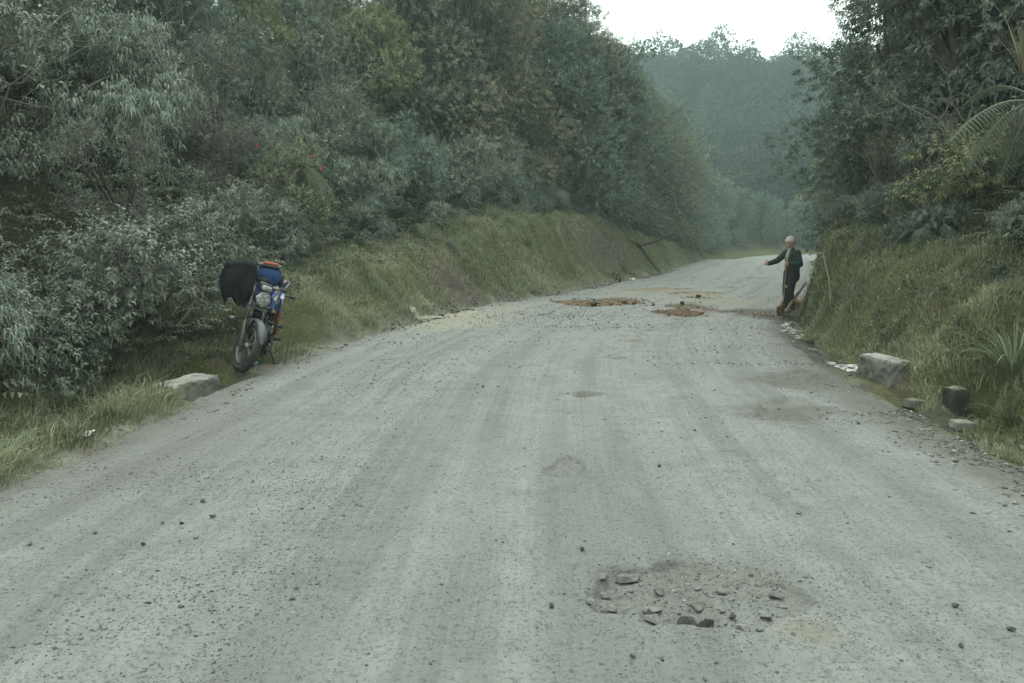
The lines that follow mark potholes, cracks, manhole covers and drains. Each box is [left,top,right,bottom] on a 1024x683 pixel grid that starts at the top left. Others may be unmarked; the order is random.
pothole [532,543,889,675]
pothole [650,302,736,314]
pothole [541,296,655,308]
